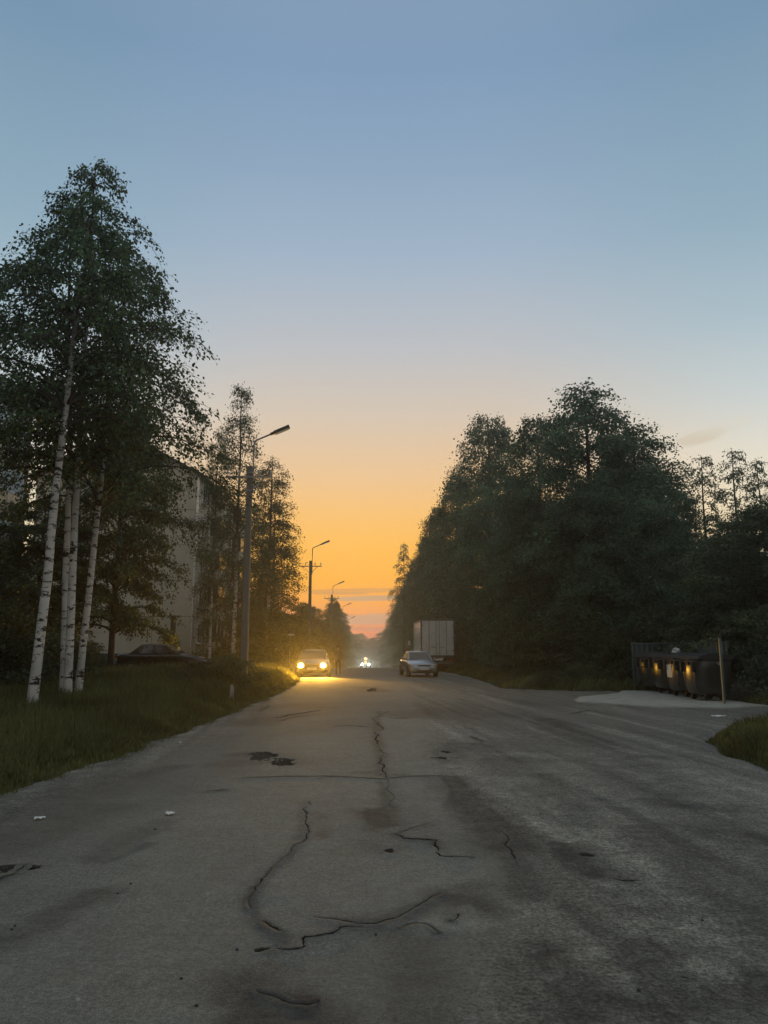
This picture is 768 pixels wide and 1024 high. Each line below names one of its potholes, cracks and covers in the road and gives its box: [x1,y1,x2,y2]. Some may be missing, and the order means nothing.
crack [247,987,321,1010]
pothole [246,751,281,762]
crack [498,833,523,866]
pothole [0,863,48,875]
crack [206,710,473,954]
pothole [260,757,297,767]
